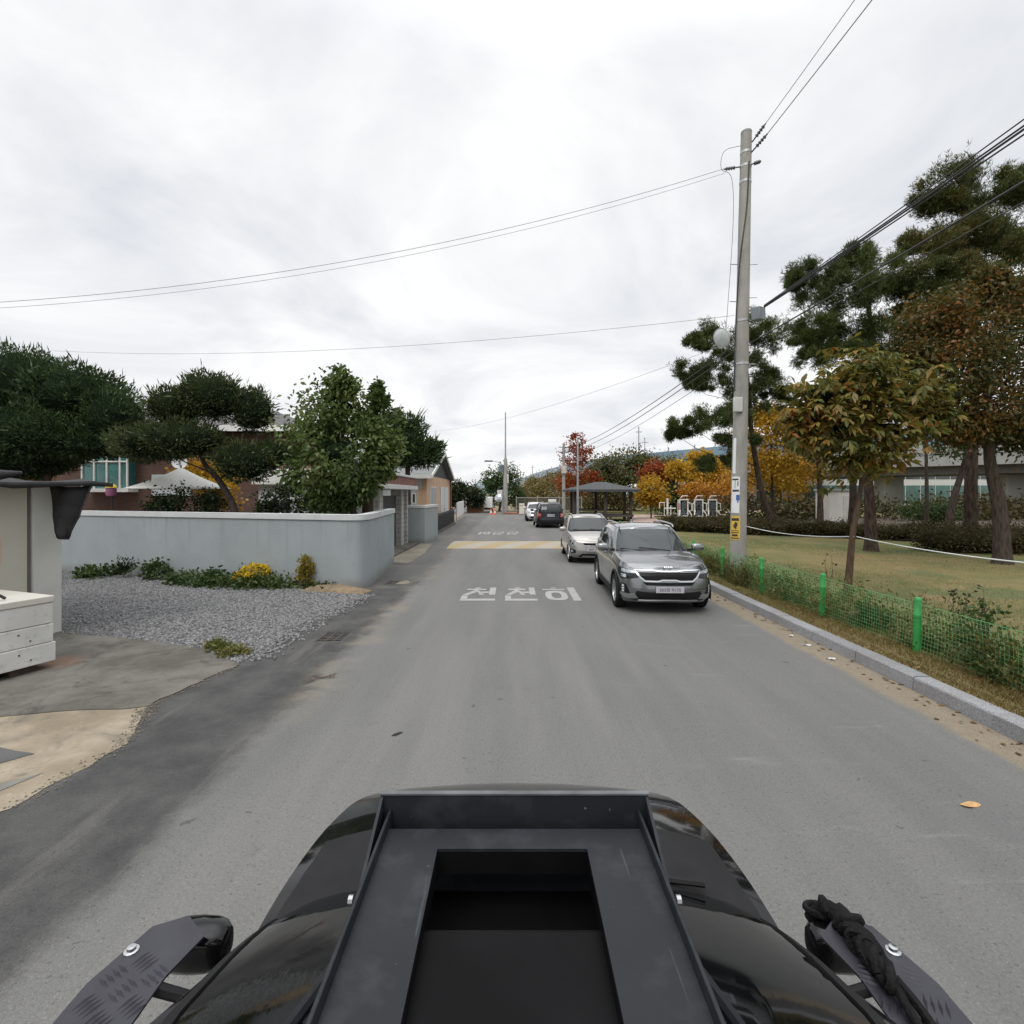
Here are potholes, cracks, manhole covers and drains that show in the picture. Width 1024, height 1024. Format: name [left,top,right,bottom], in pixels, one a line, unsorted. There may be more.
drain grate [314,631,353,642]
